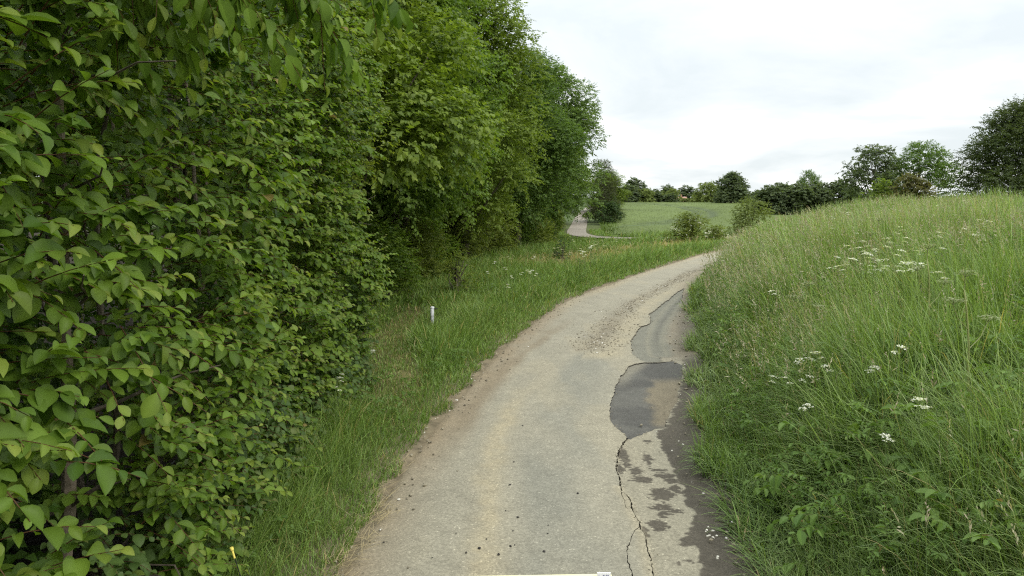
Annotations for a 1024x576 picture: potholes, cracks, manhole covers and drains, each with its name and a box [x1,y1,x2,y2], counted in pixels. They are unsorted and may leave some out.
crack [615,438,654,576]
